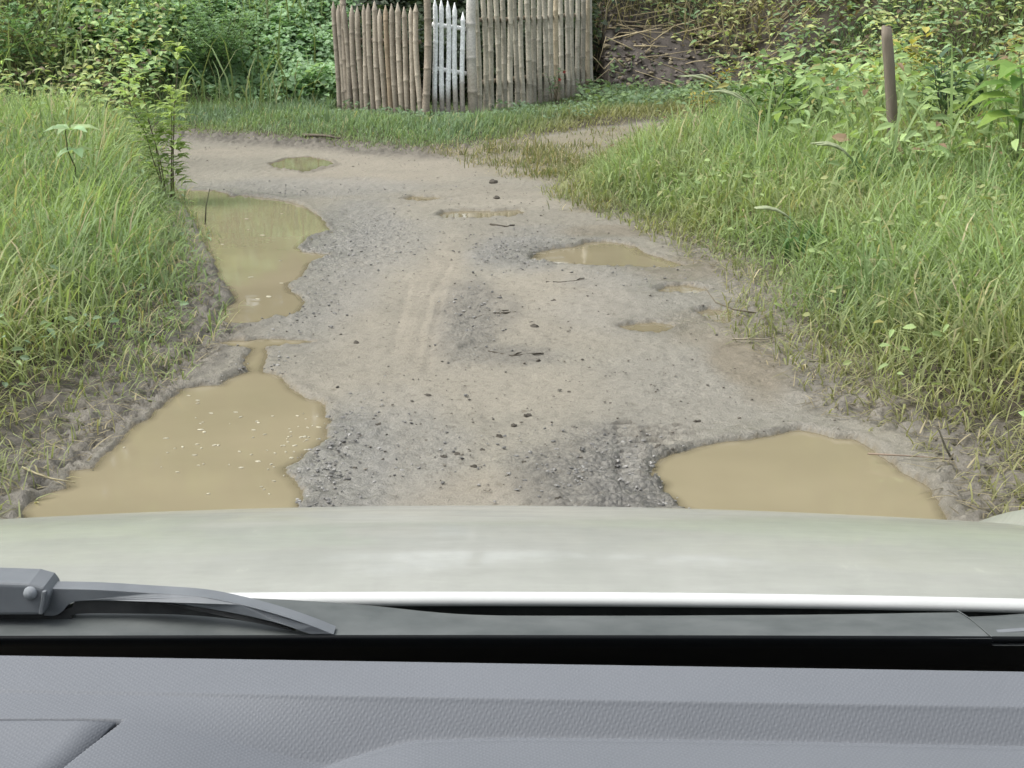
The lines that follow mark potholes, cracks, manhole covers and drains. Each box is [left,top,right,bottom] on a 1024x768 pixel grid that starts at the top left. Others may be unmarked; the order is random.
pothole [631,420,968,521]
pothole [603,317,689,336]
pothole [160,186,340,329]
pothole [0,333,348,519]
pothole [644,279,724,295]
pothole [261,155,341,174]
pothole [428,206,534,219]
pothole [518,236,698,269]
